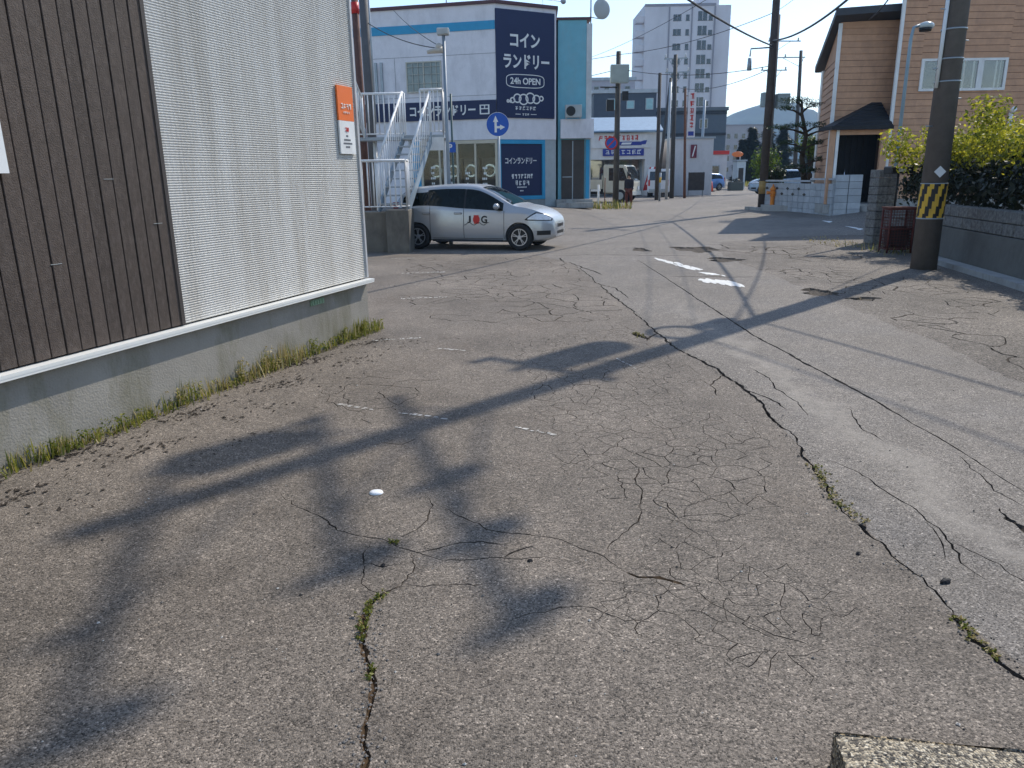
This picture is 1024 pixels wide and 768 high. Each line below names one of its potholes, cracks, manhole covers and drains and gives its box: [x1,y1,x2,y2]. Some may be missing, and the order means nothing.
pothole [801,288,839,296]
crack [394,255,1024,680]
crack [281,325,857,768]
